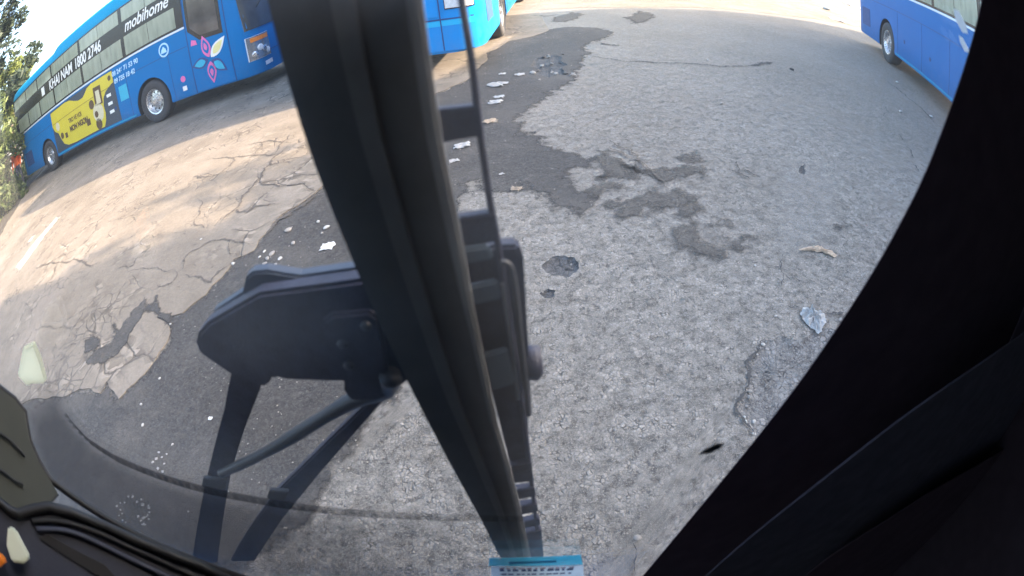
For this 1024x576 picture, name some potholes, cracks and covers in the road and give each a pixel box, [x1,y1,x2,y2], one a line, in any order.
crack [590,43,773,67]
crack [194,140,291,178]
pothole [542,255,579,278]
crack [24,200,253,376]
